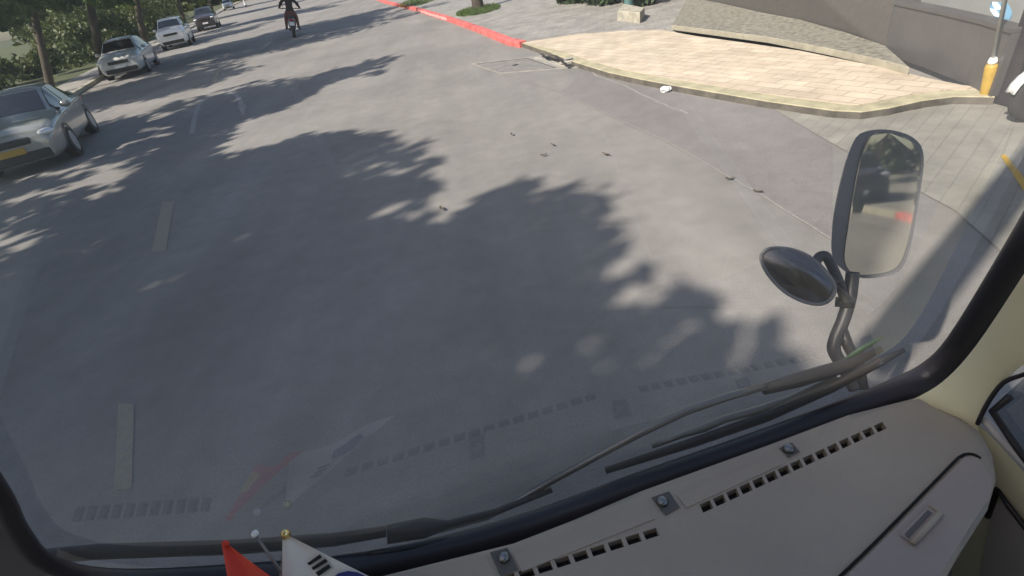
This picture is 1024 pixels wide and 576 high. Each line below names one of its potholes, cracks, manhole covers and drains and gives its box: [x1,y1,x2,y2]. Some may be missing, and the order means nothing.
manhole cover [472,55,577,74]
